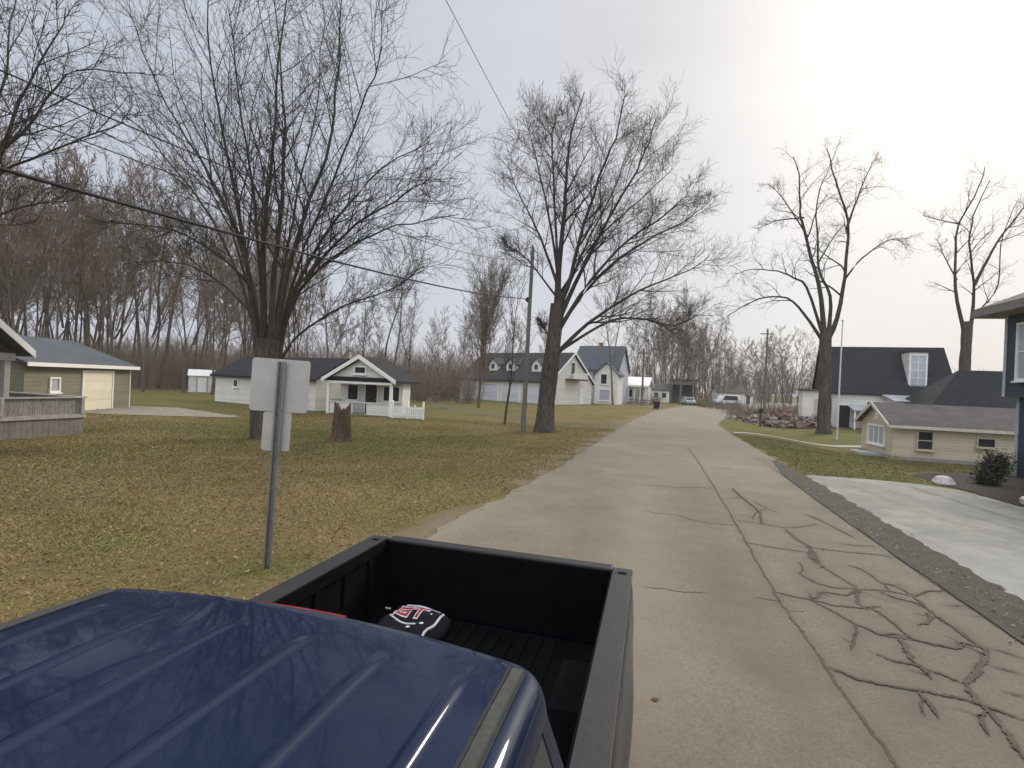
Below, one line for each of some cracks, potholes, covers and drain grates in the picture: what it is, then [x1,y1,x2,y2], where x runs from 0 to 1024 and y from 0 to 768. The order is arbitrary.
crack [648,448,1024,768]
